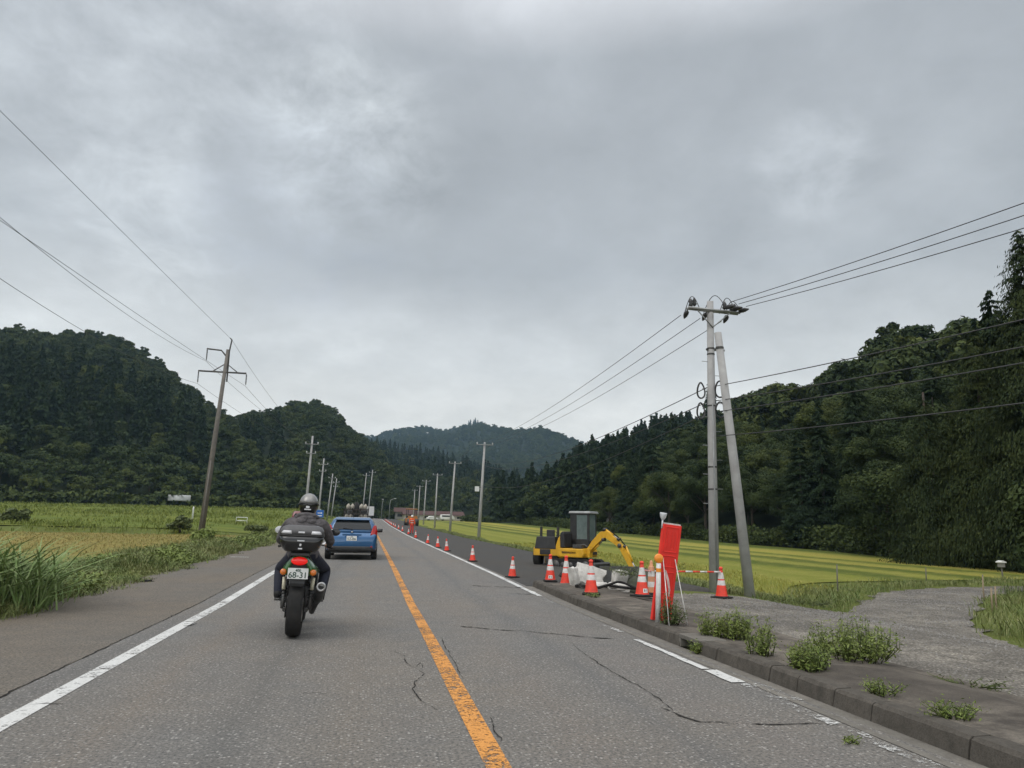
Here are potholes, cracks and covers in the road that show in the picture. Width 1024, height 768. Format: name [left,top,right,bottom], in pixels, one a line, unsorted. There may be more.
crack [442,625,806,725]
